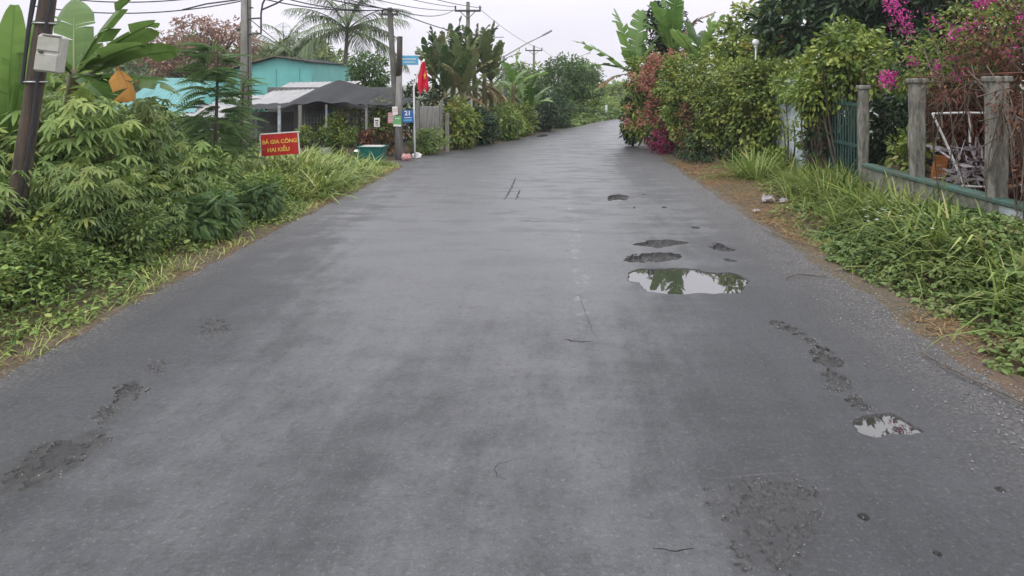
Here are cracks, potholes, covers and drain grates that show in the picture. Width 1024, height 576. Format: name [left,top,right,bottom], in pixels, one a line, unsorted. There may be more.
pothole [104,381,158,406]
pothole [136,357,175,377]
pothole [88,402,125,428]
pothole [806,342,844,371]
pothole [769,320,807,336]
pothole [196,318,232,340]
pothole [816,365,857,395]
pothole [1,432,126,491]
pothole [633,239,689,248]
pothole [853,413,924,437]
pothole [627,268,750,294]
pothole [622,252,683,263]
